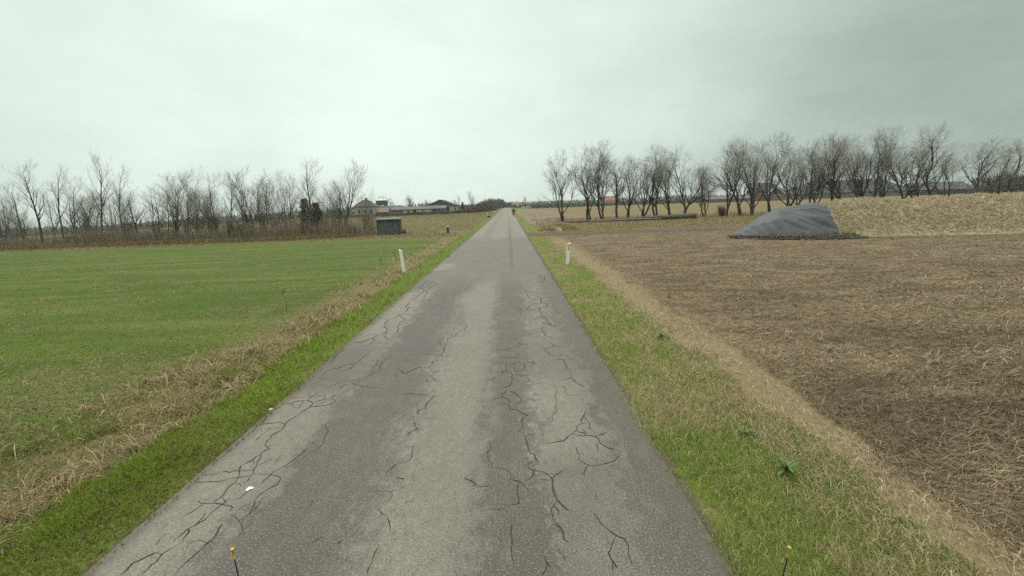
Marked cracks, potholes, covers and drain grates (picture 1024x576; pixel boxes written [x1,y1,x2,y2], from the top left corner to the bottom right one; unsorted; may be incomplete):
crack [121,392,345,576]
crack [593,494,633,574]
crack [464,276,622,576]
crack [318,280,467,574]
